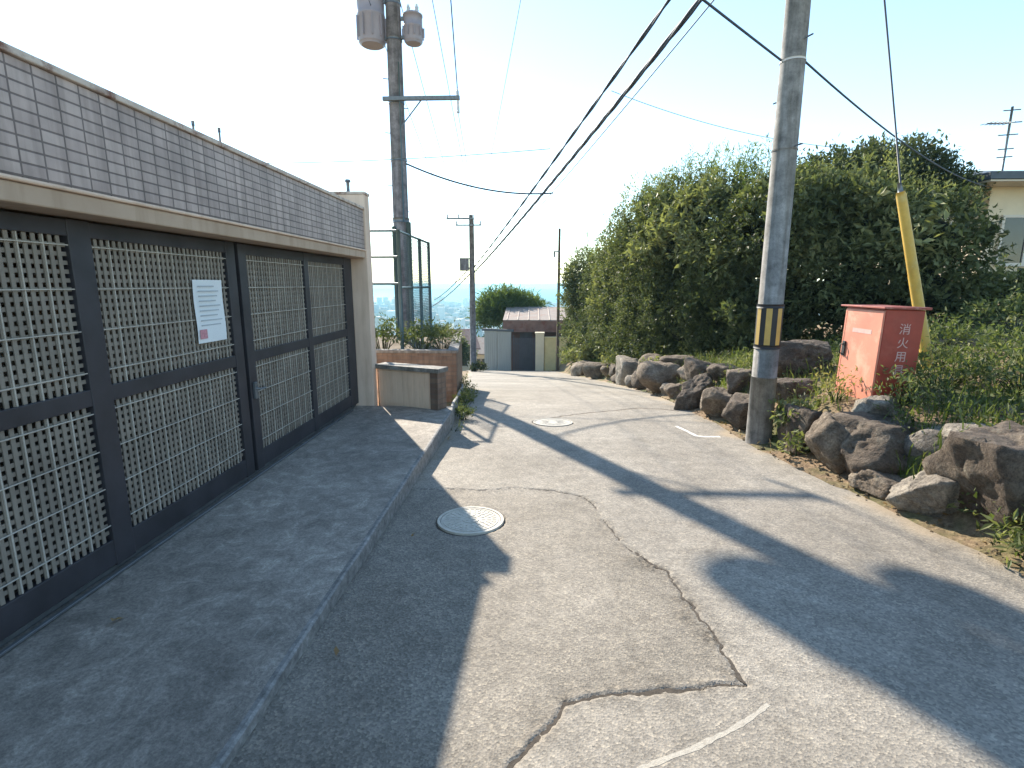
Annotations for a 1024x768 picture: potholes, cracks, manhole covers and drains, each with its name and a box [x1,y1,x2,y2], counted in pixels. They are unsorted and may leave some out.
manhole cover [436,506,505,536]
crack [424,488,747,768]
manhole cover [532,418,574,427]
crack [553,408,675,418]
